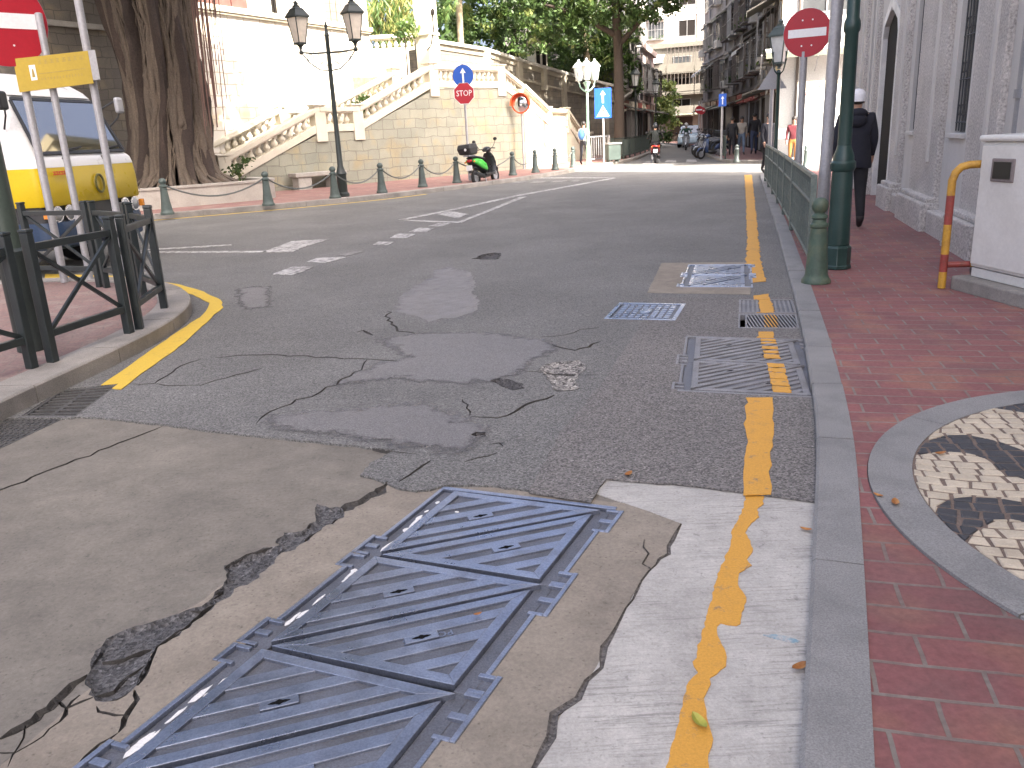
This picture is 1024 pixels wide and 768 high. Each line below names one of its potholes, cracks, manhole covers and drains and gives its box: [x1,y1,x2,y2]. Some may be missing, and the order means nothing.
manhole cover [604,302,685,320]
crack [358,311,440,335]
crack [130,354,397,424]
drain grate [738,313,799,329]
pothole [491,378,524,390]
crack [462,395,554,418]
manhole cover [677,275,756,287]
drain grate [23,385,116,416]
manhole cover [681,264,756,276]
